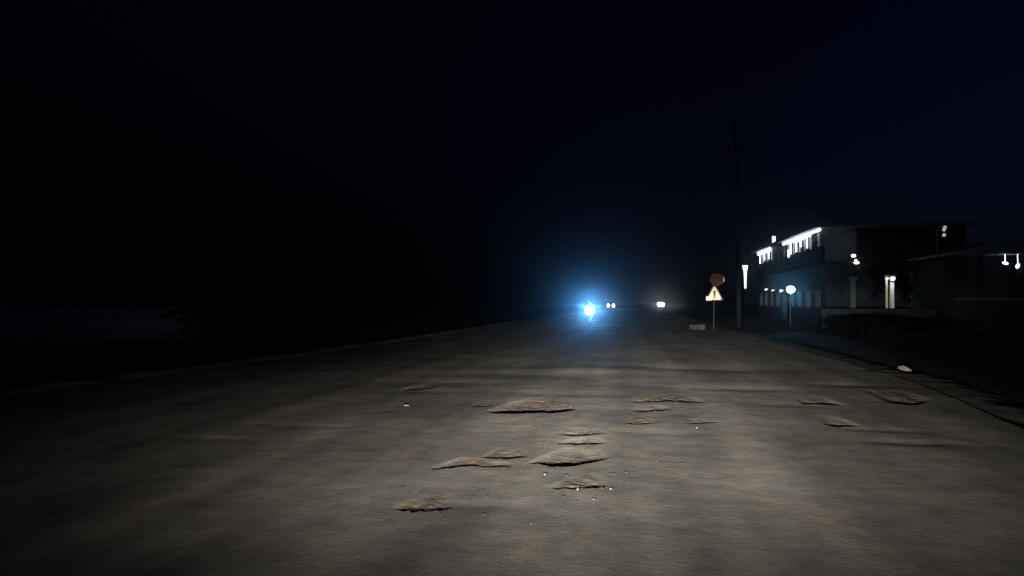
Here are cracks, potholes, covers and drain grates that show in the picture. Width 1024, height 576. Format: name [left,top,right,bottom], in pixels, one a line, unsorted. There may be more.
pothole [630,404,673,413]
pothole [484,394,579,414]
pothole [553,436,610,445]
pothole [546,473,611,490]
pothole [400,383,440,391]
pothole [555,426,609,436]
pothole [522,446,614,467]
pothole [626,392,708,403]
pothole [856,386,933,406]
pothole [480,447,531,459]
pothole [818,415,865,427]
pothole [621,414,664,425]
